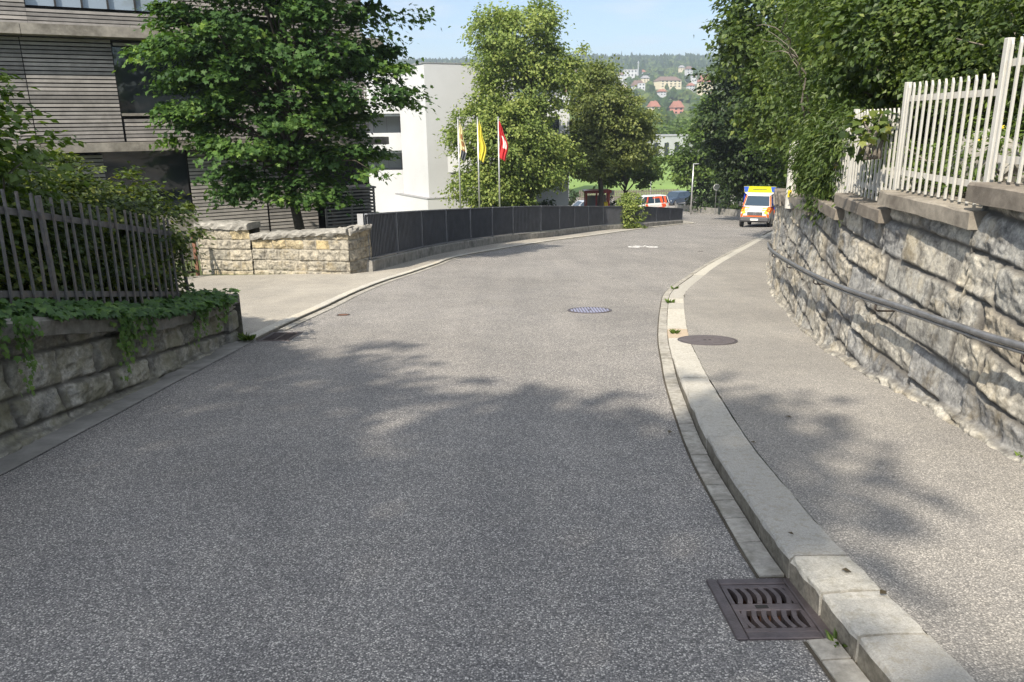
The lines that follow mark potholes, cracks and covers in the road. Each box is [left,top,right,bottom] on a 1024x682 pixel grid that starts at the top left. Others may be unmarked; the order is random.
drain grate [706,578,834,641]
manhole cover [677,335,738,347]
drain grate [257,332,303,341]
